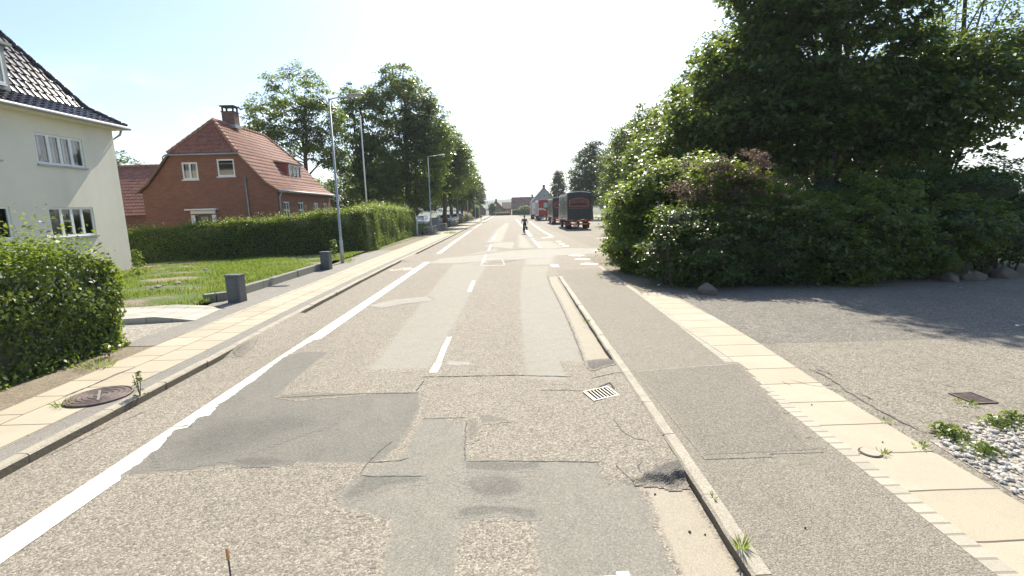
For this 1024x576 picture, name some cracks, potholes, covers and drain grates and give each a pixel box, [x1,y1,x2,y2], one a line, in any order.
crack [360,441,421,477]
manhole cover [62,385,134,408]
drain grate [583,386,619,401]
crack [782,368,937,433]
manhole cover [858,447,884,458]
